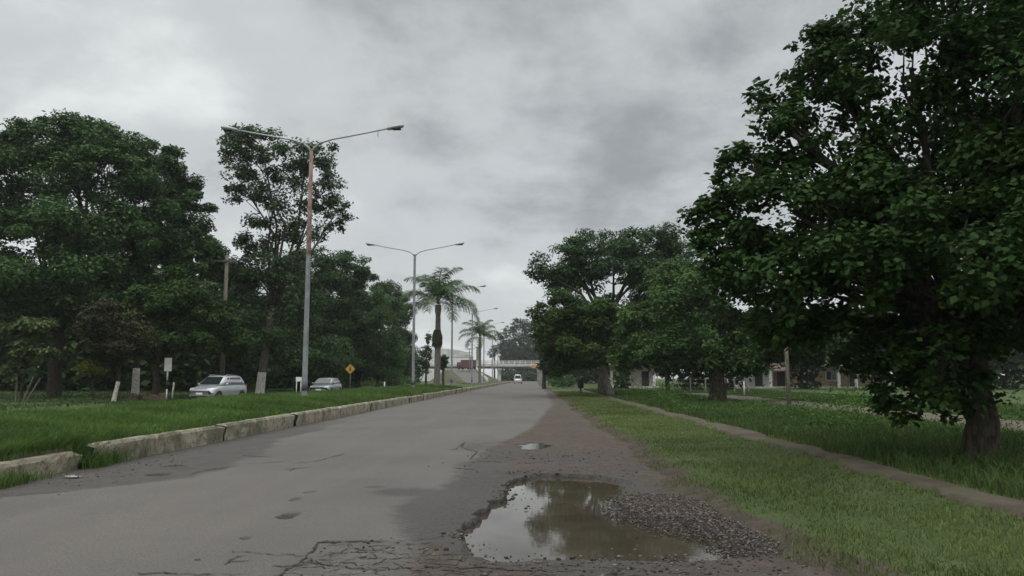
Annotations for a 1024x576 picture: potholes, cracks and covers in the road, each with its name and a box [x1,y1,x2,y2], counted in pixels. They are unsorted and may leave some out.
pothole [511,442,556,450]
pothole [452,472,756,563]
pothole [273,511,305,521]
crack [137,536,703,576]
